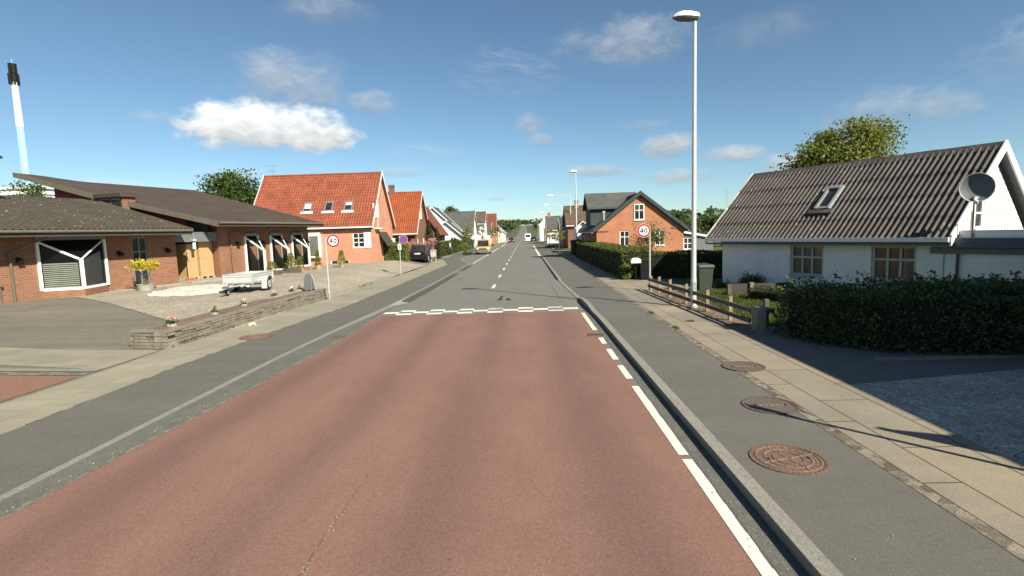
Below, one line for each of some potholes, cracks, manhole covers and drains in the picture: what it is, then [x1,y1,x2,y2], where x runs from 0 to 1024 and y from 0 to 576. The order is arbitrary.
manhole cover [749,444,830,475]
manhole cover [741,396,801,414]
manhole cover [722,361,766,372]
crack [299,448,383,576]
